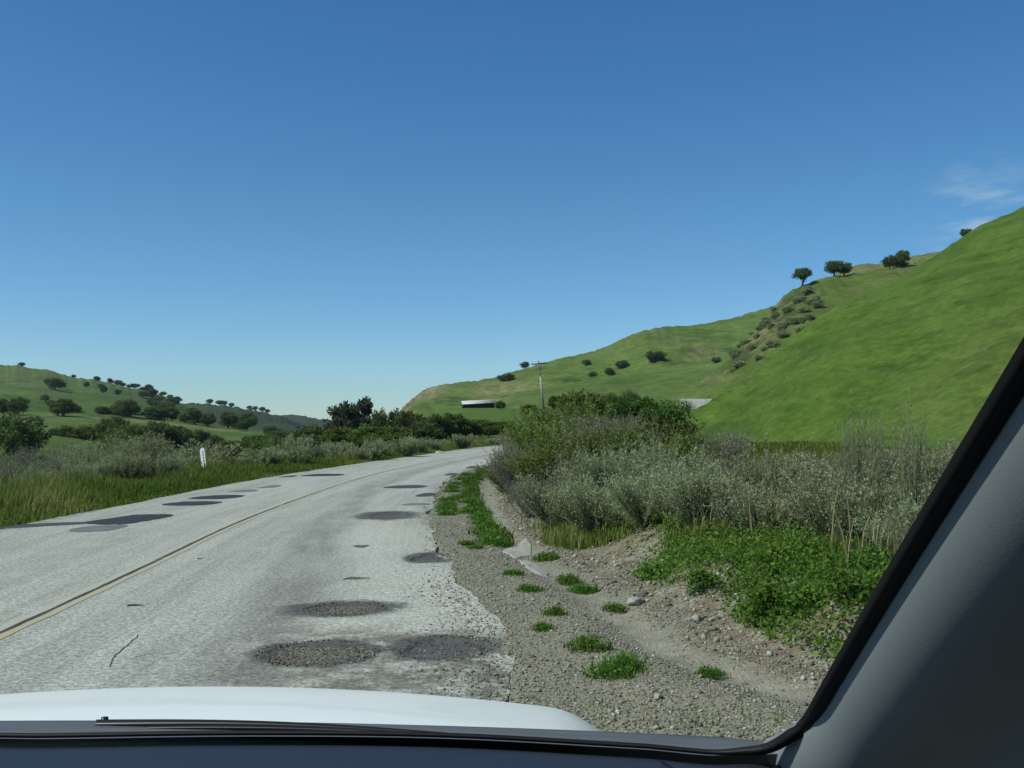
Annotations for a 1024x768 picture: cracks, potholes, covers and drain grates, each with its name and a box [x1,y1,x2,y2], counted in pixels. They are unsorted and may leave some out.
pothole [365,511,410,520]
pothole [303,601,386,616]
pothole [408,552,450,562]
pothole [392,635,495,660]
pothole [254,638,383,667]
